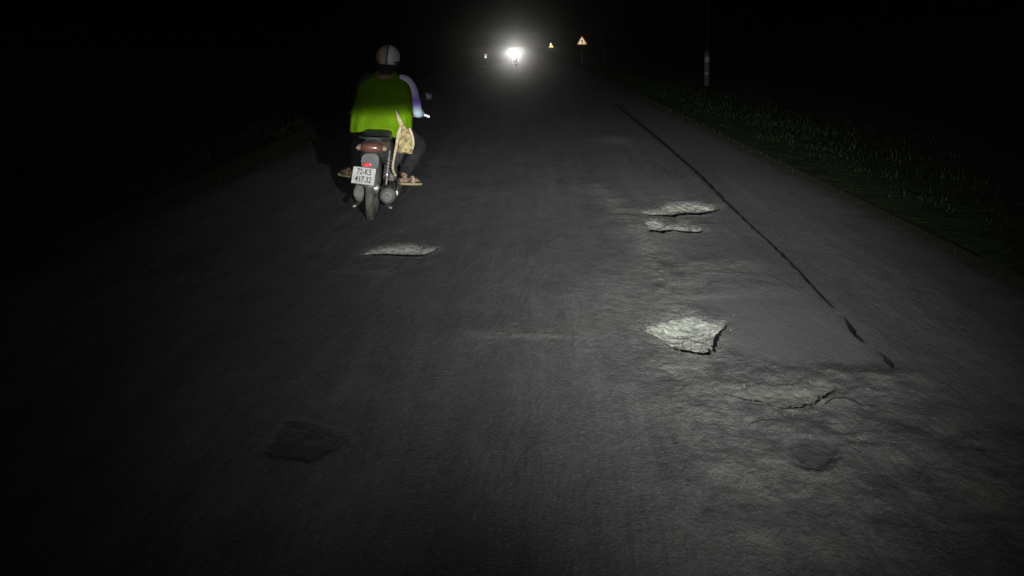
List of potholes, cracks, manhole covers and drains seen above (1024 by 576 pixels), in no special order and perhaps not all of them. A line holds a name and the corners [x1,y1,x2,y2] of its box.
pothole [720,376,846,416]
pothole [253,414,361,466]
crack [617,104,894,369]
pothole [778,432,848,474]
pothole [635,312,735,358]
pothole [638,218,709,233]
pothole [637,199,720,217]
pothole [352,243,439,257]
crack [825,396,889,412]
